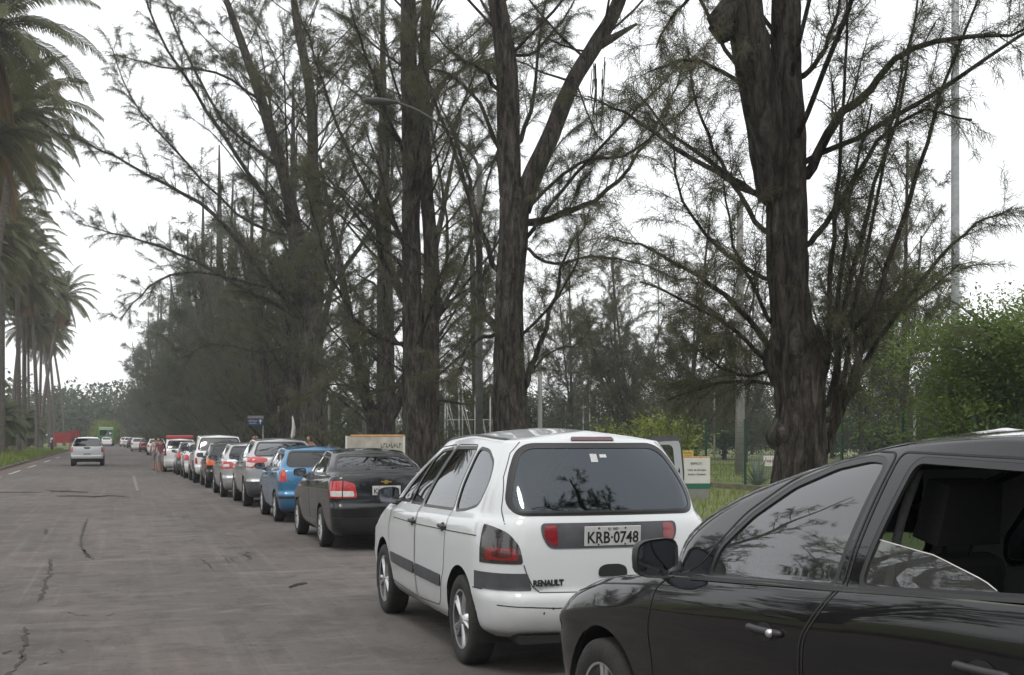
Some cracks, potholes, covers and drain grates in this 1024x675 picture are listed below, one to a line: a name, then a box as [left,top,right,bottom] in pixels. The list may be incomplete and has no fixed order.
crack [79,520,95,559]
crack [2,627,64,675]
crack [37,529,114,616]
crack [200,547,252,570]
